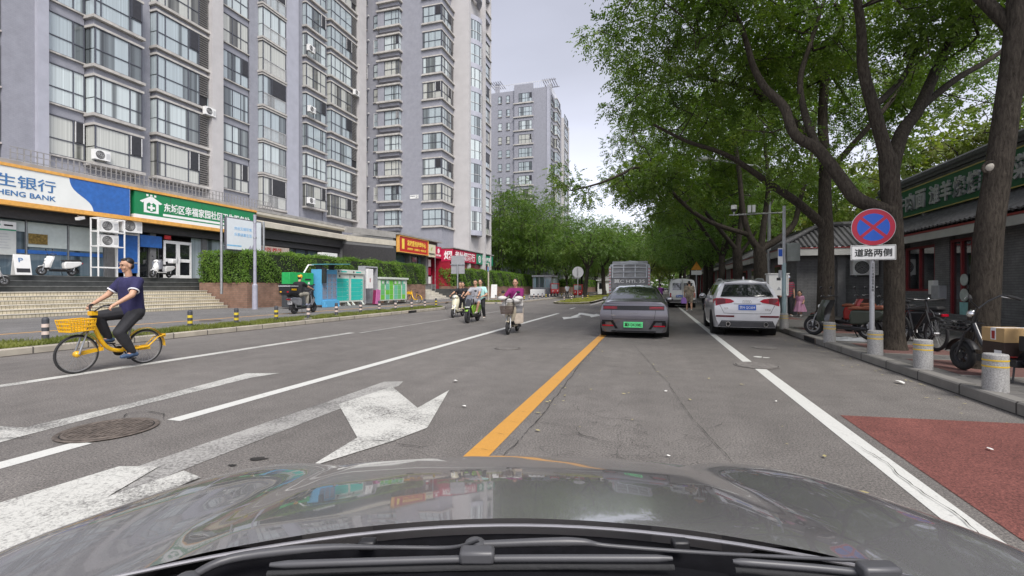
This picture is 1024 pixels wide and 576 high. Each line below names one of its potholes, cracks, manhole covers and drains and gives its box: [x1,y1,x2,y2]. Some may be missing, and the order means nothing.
crack [851,441,979,533]
manhole cover [51,417,160,443]
